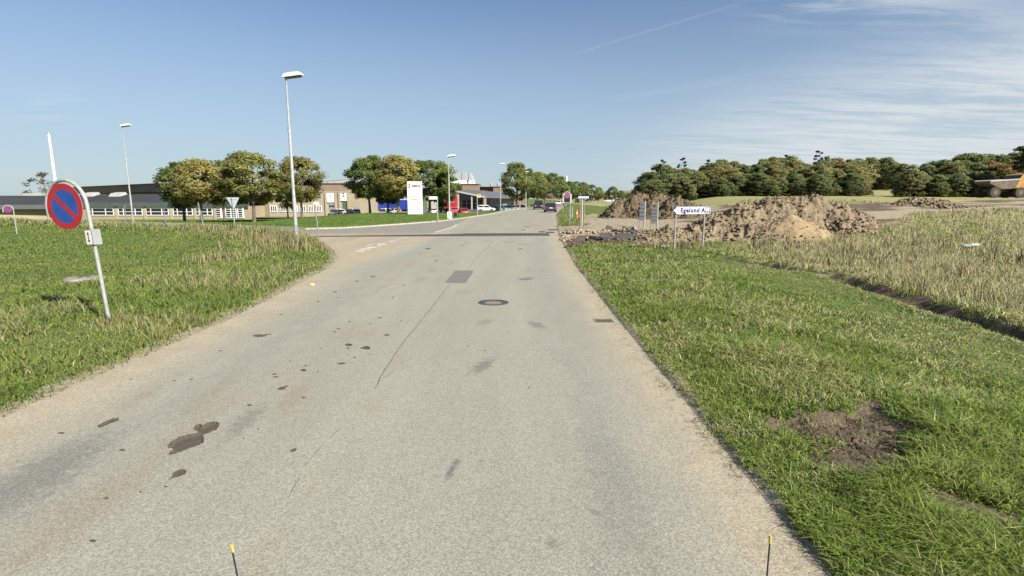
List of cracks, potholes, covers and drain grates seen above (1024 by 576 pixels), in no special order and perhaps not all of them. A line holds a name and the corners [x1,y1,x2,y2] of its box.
crack [289,356,413,496]
